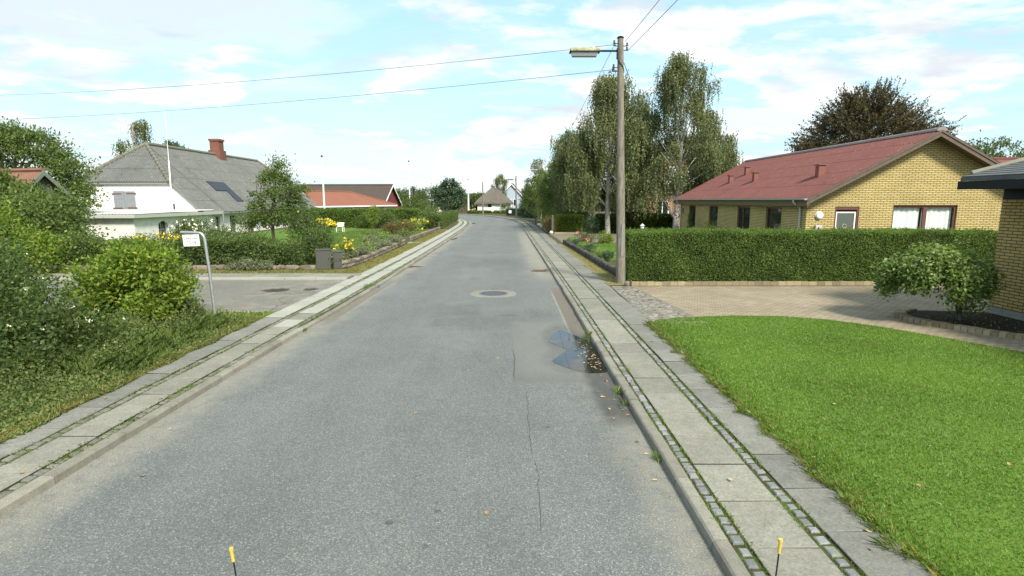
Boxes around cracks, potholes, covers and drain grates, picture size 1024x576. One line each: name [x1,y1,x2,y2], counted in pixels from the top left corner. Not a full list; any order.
crack [513,355,541,523]
manhole cover [470,290,516,298]
